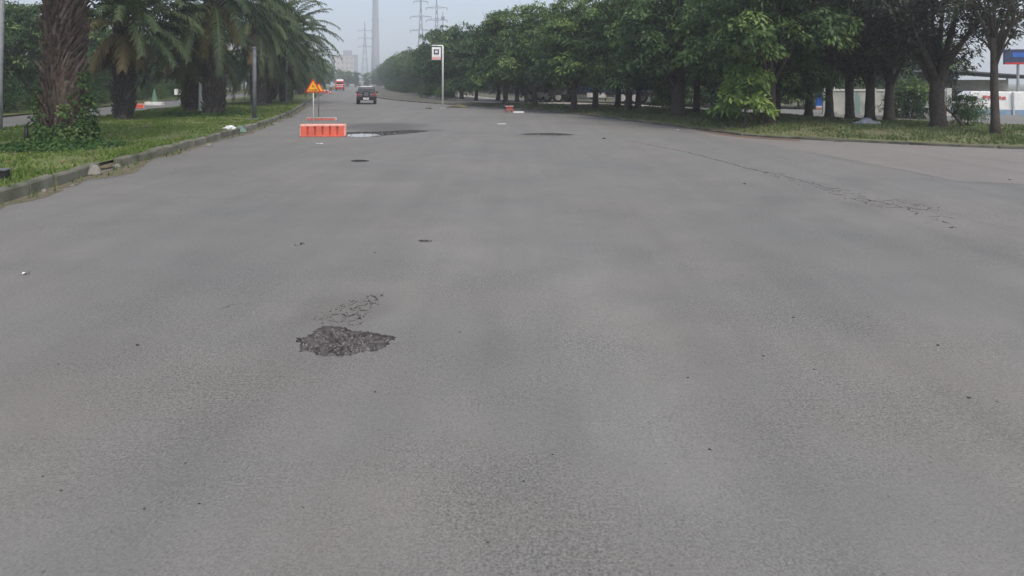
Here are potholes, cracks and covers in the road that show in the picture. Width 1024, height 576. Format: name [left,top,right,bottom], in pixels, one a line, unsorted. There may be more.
crack [627,140,956,228]
pothole [296,326,396,358]
crack [313,294,383,326]
